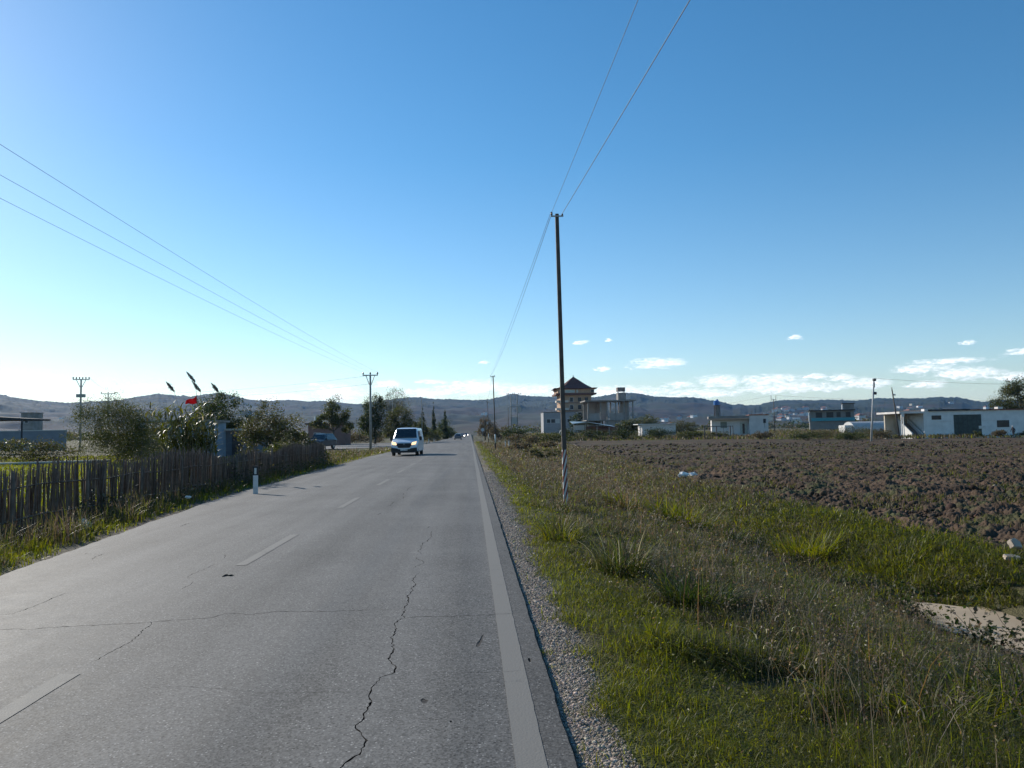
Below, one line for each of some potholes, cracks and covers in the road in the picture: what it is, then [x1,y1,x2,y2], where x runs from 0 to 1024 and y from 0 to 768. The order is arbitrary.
crack [3,527,470,768]
